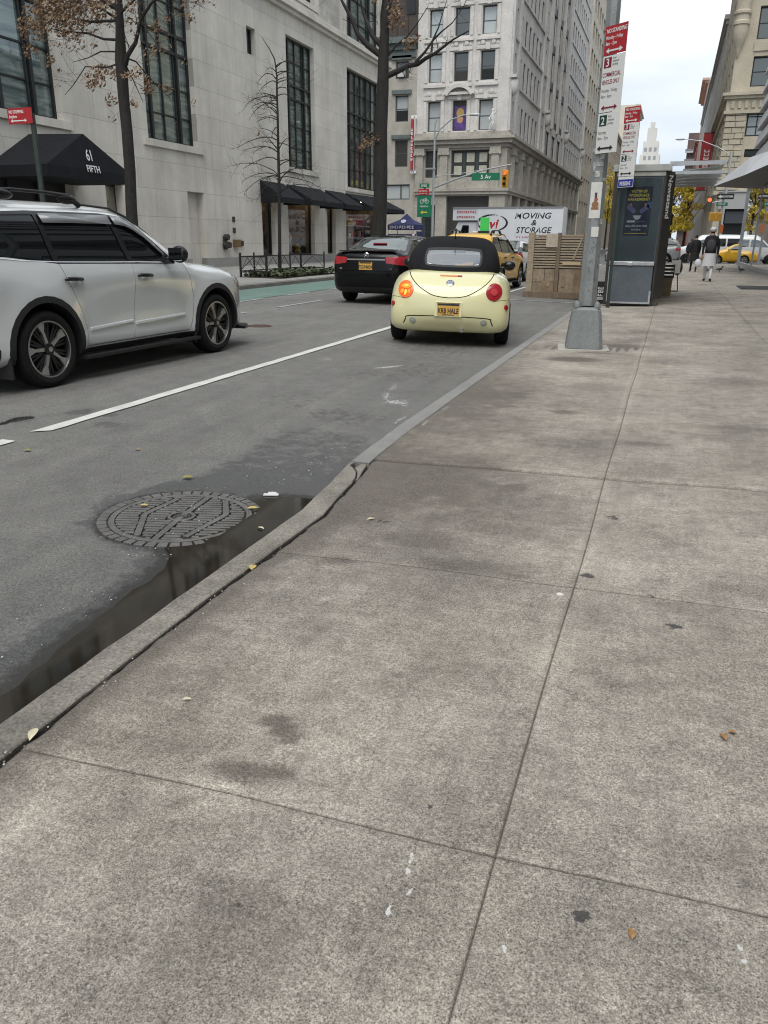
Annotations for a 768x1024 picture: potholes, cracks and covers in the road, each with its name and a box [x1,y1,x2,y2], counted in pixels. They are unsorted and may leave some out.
manhole cover [95,491,260,548]
